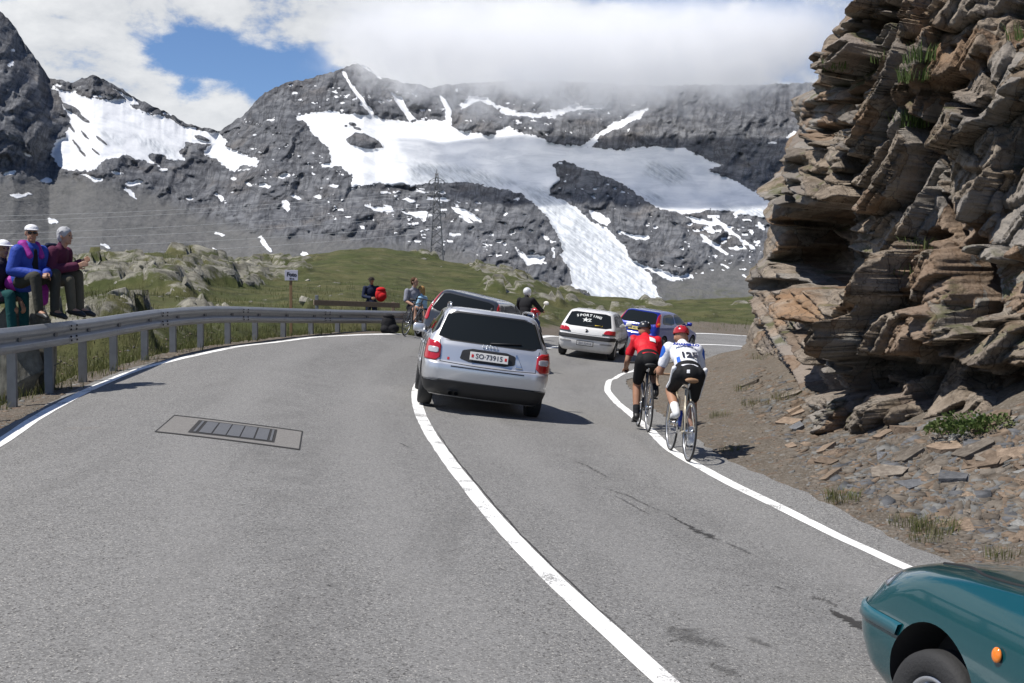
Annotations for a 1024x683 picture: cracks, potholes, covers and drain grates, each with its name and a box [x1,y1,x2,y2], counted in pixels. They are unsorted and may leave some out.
crack [671,516,715,538]
